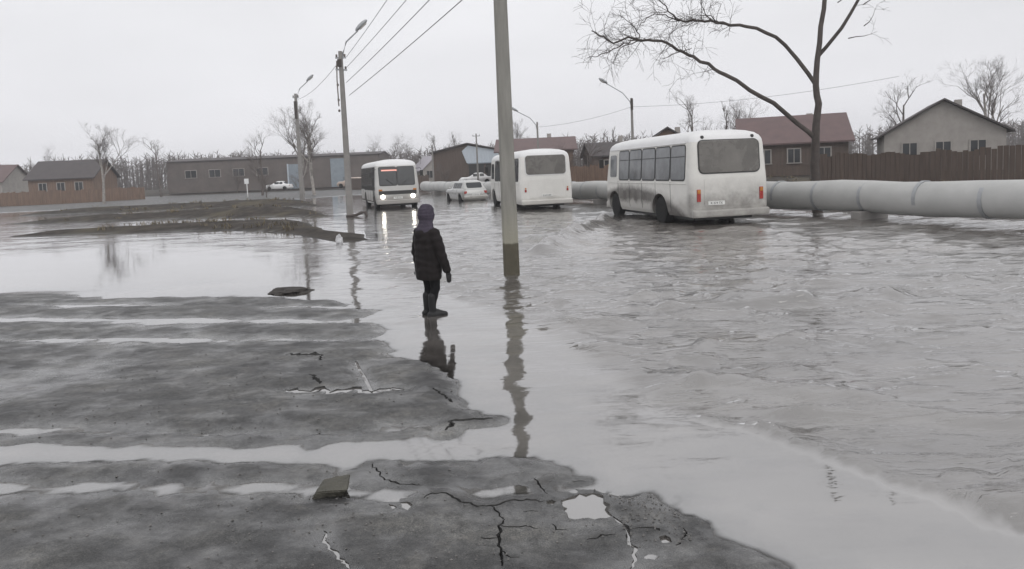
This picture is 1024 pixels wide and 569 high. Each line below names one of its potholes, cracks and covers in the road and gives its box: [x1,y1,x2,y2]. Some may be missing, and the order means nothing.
crack [433,388,492,430]
crack [285,351,401,393]
pothole [561,493,612,518]
crack [587,516,687,569]
crack [372,463,566,566]
